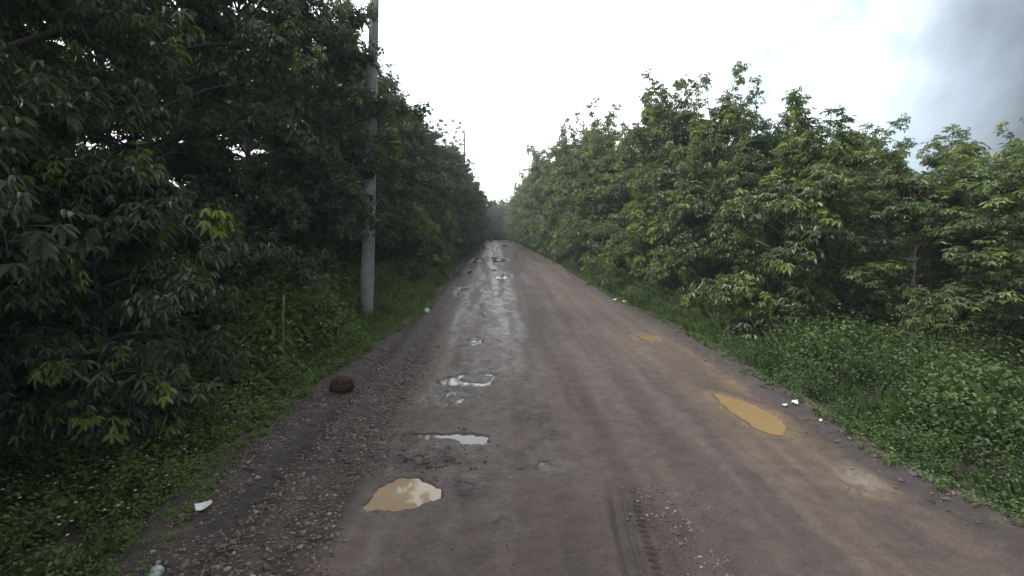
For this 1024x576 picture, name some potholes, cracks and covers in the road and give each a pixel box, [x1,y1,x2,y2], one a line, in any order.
pothole [530,457,567,476]
pothole [431,371,500,388]
pothole [631,333,663,342]
pothole [356,474,451,516]
pothole [707,391,793,437]
pothole [422,386,484,407]
pothole [458,336,489,346]
pothole [395,430,493,446]
pothole [452,286,473,297]
